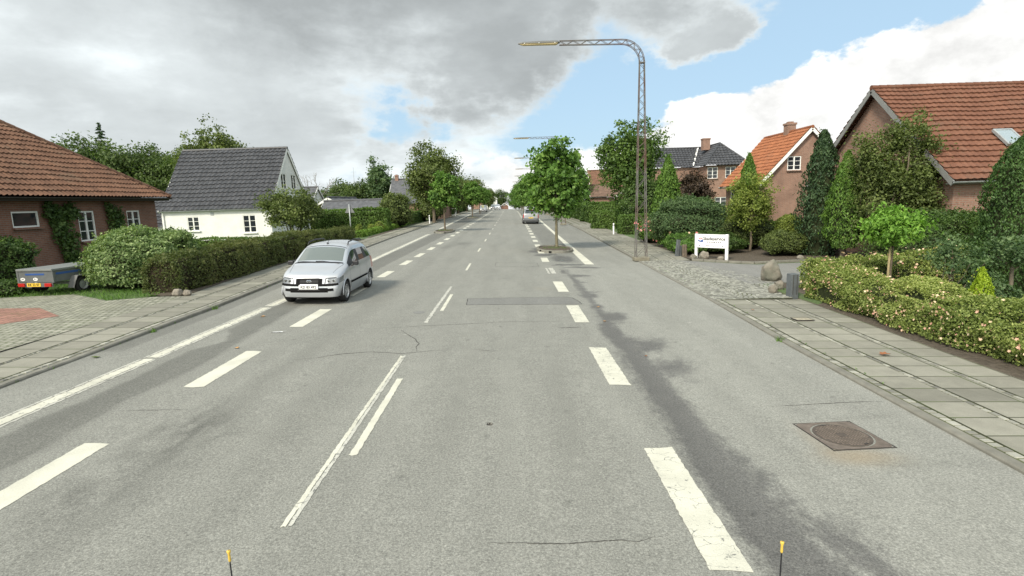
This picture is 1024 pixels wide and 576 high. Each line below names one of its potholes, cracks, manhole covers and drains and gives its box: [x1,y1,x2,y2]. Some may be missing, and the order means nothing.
crack [297,321,511,360]
manhole cover [792,421,897,451]
crack [489,536,658,544]
